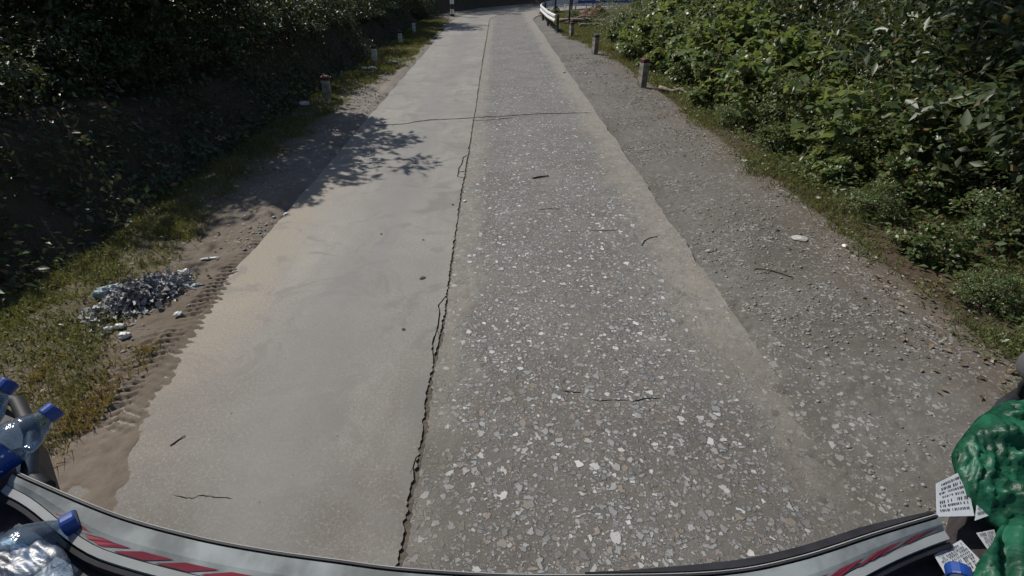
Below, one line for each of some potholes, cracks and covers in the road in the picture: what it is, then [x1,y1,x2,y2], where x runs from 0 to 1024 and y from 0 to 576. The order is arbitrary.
crack [377,8,587,567]
crack [564,391,661,402]
